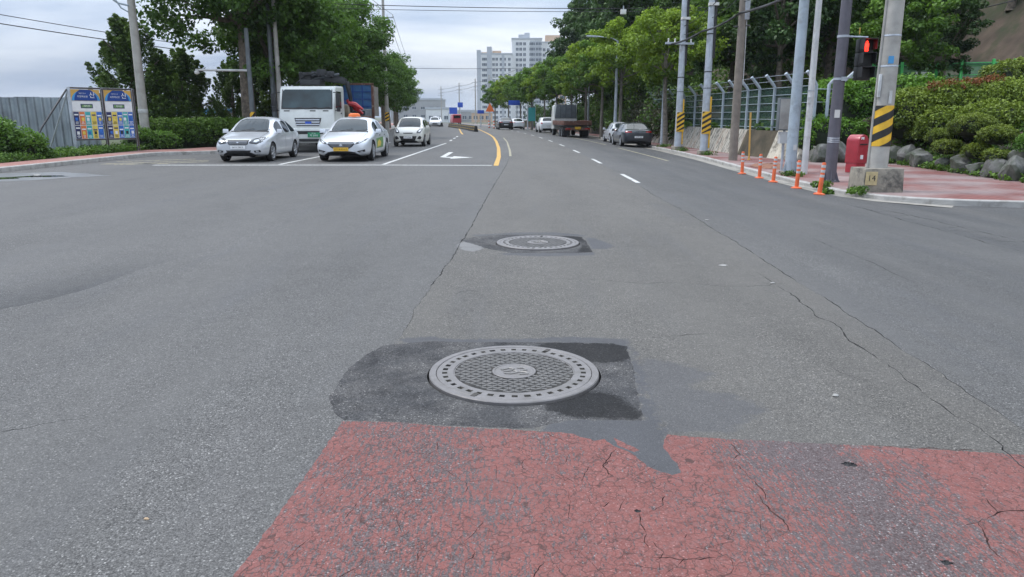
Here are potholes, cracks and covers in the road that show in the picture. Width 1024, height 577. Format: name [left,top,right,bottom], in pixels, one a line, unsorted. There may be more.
crack [966,499,1024,559]
manhole cover [428,345,601,406]
crack [274,439,791,577]
crack [555,187,1024,468]
manhole cover [497,235,579,251]
